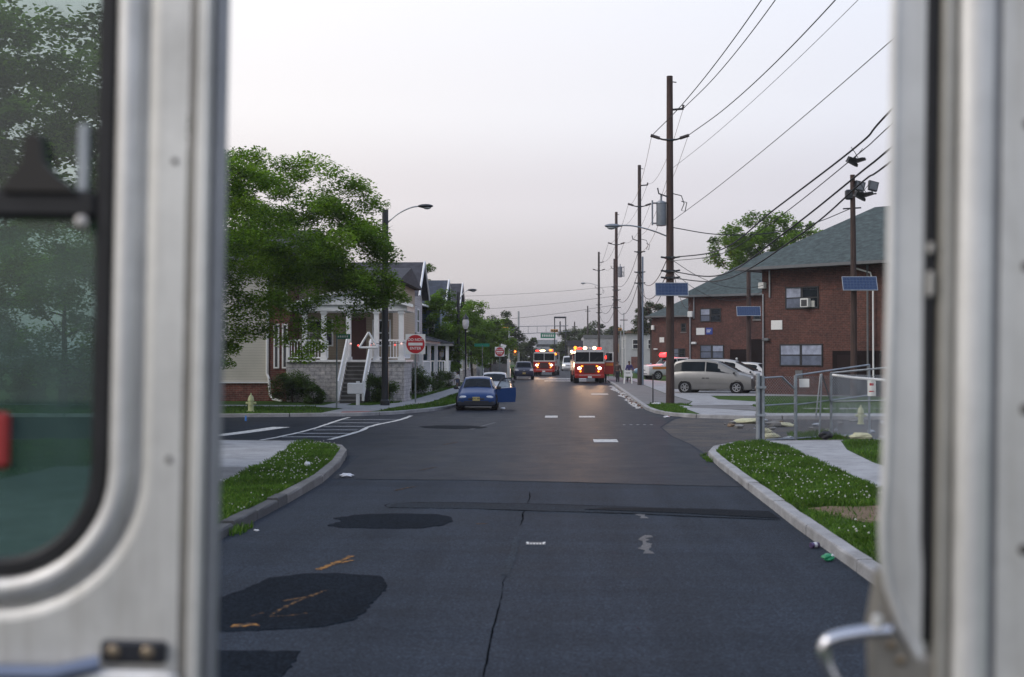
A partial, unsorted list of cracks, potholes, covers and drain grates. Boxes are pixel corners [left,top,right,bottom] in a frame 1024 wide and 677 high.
crack [483,577,506,677]
